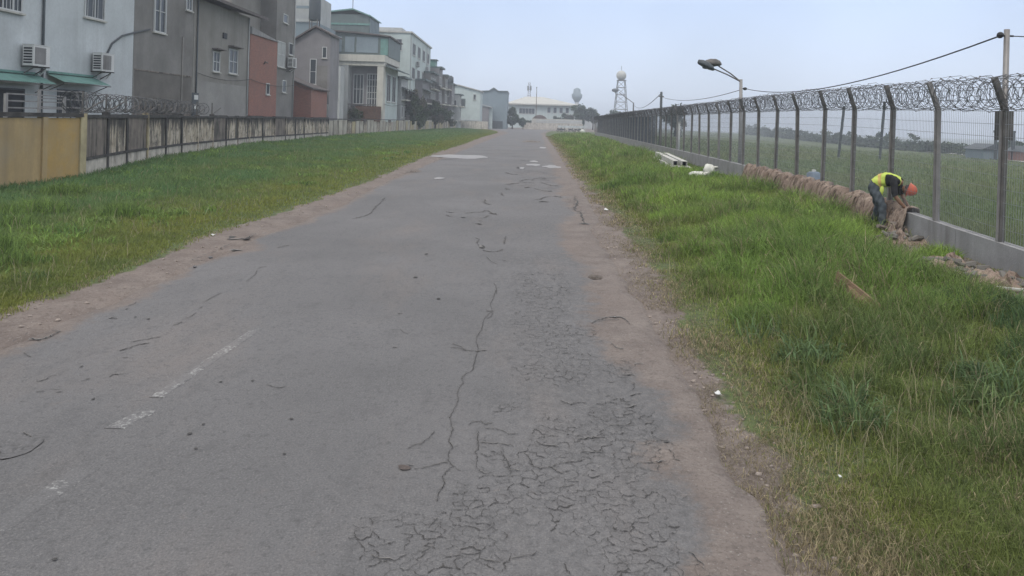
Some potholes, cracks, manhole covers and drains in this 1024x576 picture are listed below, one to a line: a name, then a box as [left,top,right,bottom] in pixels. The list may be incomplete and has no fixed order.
crack [467,133,589,264]
crack [339,268,710,576]
